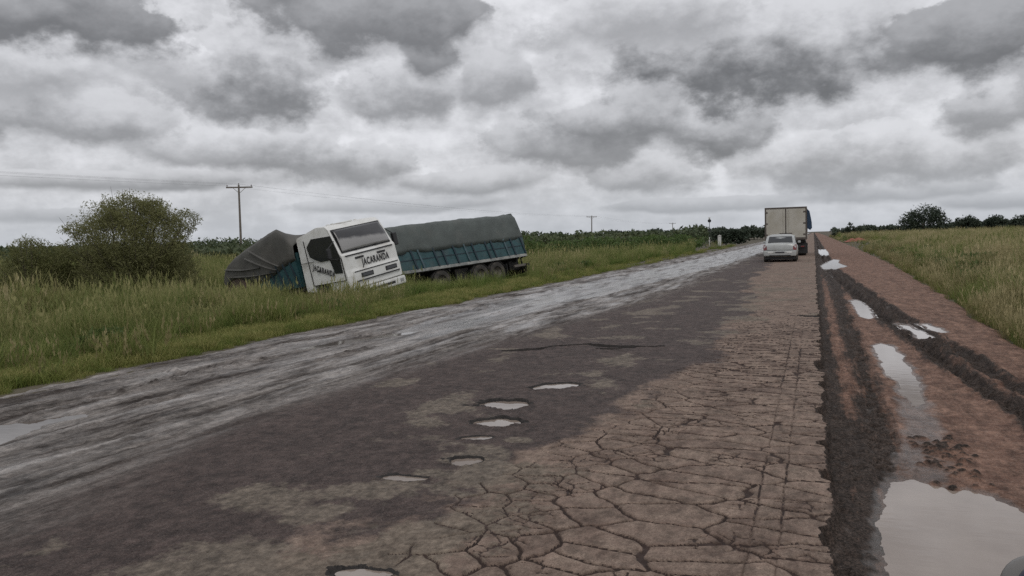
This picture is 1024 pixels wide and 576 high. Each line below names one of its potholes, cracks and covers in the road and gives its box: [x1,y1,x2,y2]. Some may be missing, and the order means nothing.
pothole [463,398,533,410]
pothole [376,472,430,482]
pothole [325,564,400,576]
crack [388,306,833,576]
pothole [468,415,529,427]
pothole [440,455,485,466]
pothole [526,382,586,390]
